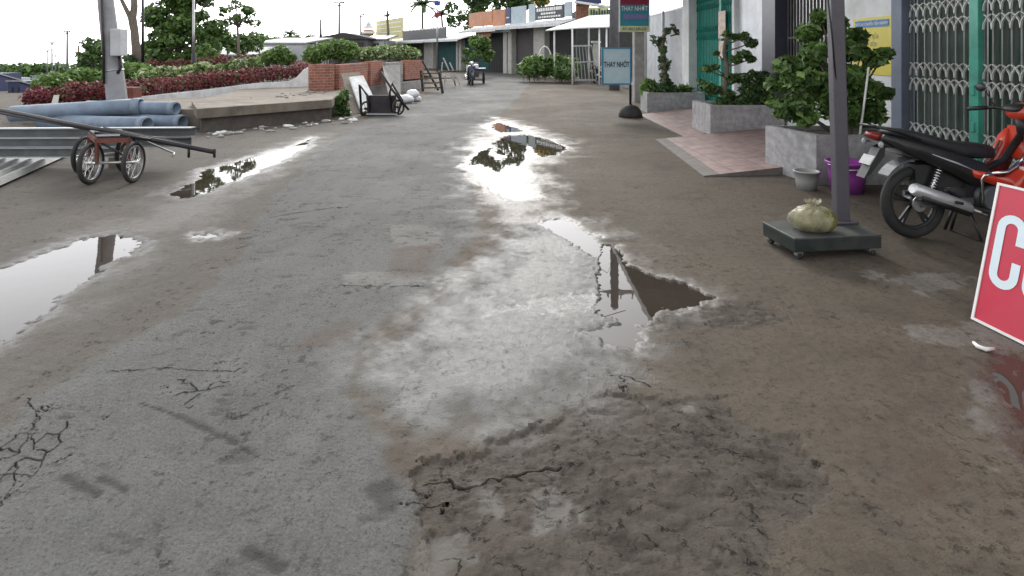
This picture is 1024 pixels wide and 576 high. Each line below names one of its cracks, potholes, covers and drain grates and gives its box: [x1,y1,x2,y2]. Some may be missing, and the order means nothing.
crack [116,367,237,402]
pothole [591,240,791,333]
crack [417,466,563,508]
crack [0,398,68,487]
